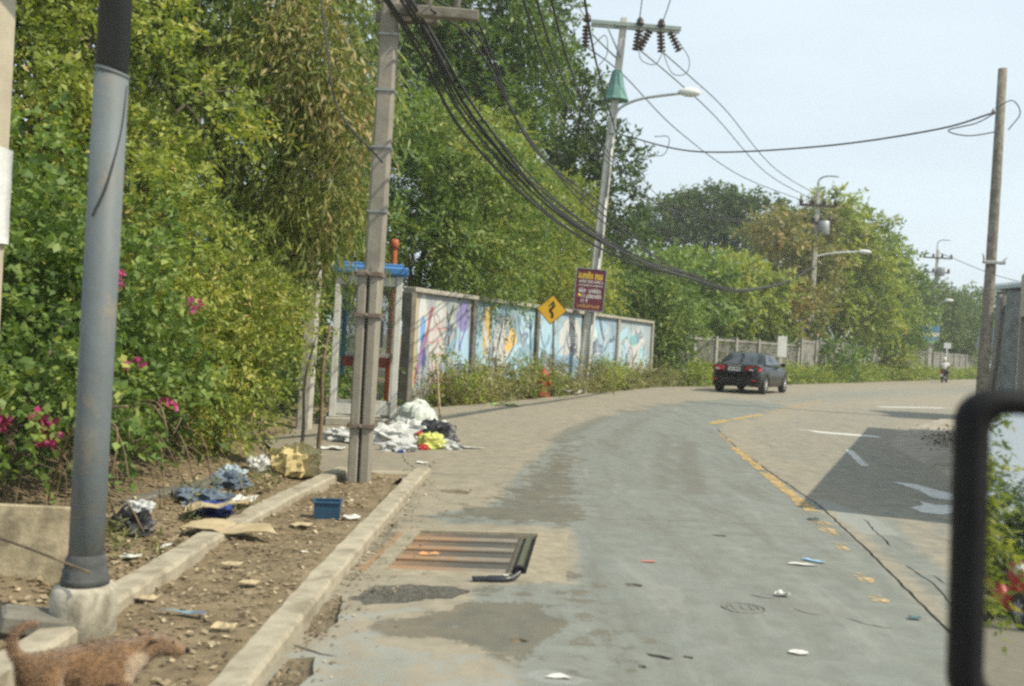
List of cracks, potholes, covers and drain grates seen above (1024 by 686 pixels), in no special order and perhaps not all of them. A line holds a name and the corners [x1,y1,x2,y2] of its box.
manhole cover [719,602,765,614]
crack [907,566,948,602]
